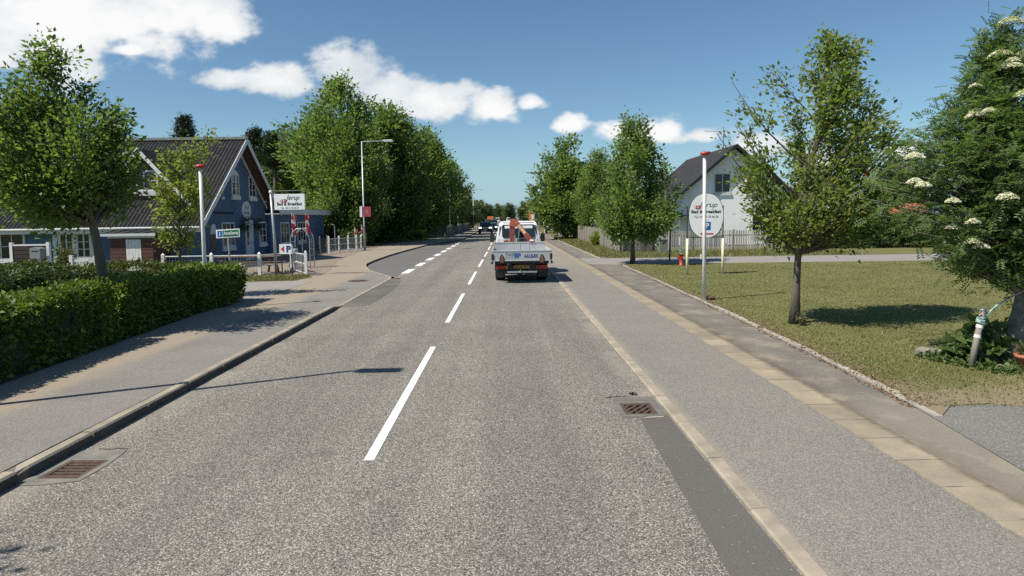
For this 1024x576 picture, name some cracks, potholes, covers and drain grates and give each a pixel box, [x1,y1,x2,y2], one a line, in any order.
drain grate [37,460,108,479]
drain grate [620,403,658,415]
